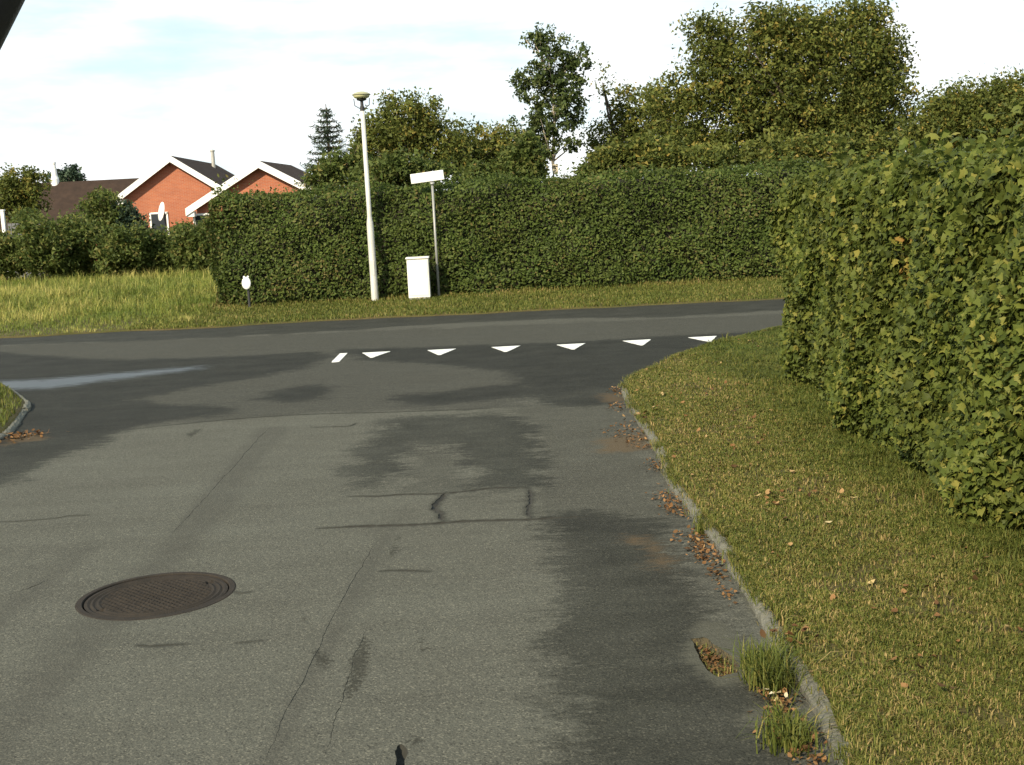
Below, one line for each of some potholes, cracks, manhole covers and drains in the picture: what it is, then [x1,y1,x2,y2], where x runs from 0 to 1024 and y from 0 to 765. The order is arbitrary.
pothole [691,637,739,677]
manhole cover [75,572,236,621]
crack [266,548,372,758]
crack [317,487,588,529]
